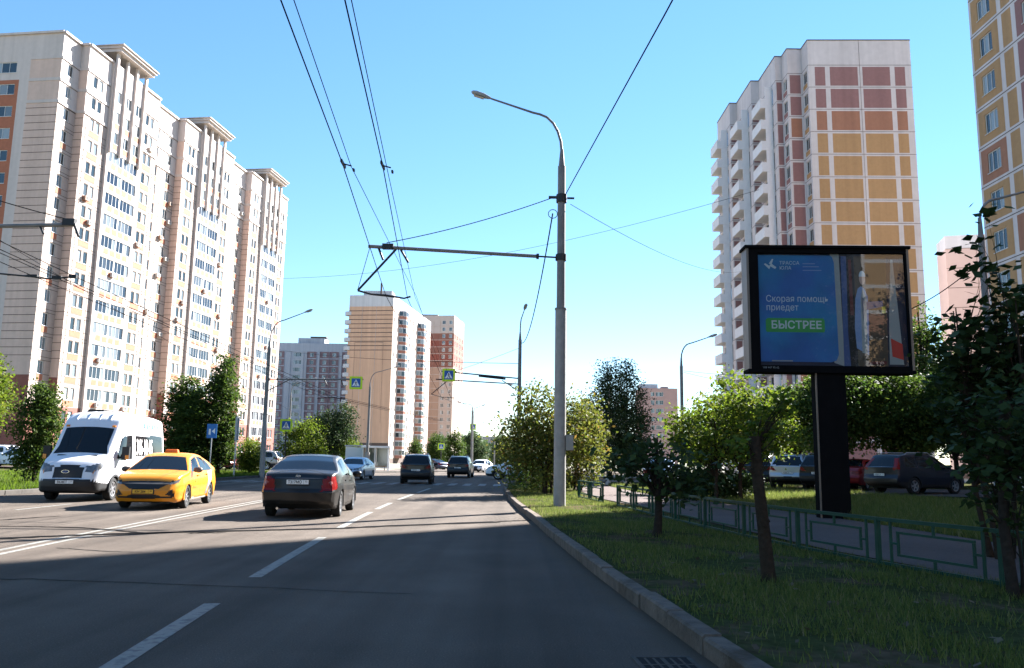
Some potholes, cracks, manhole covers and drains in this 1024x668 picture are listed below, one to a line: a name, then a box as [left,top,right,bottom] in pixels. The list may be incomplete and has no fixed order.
drain grate [631,656,703,668]
